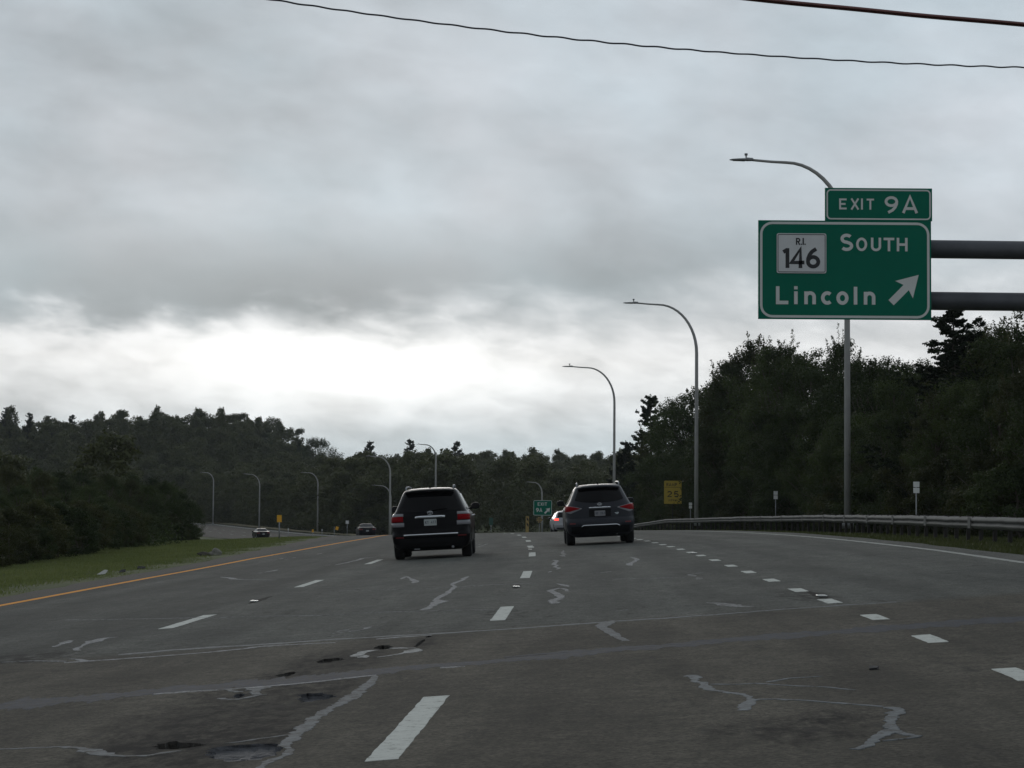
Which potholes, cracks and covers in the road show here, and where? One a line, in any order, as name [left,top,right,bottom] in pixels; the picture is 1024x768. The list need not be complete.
pothole [296,692,337,703]
pothole [205,743,283,762]
pothole [152,741,205,749]
